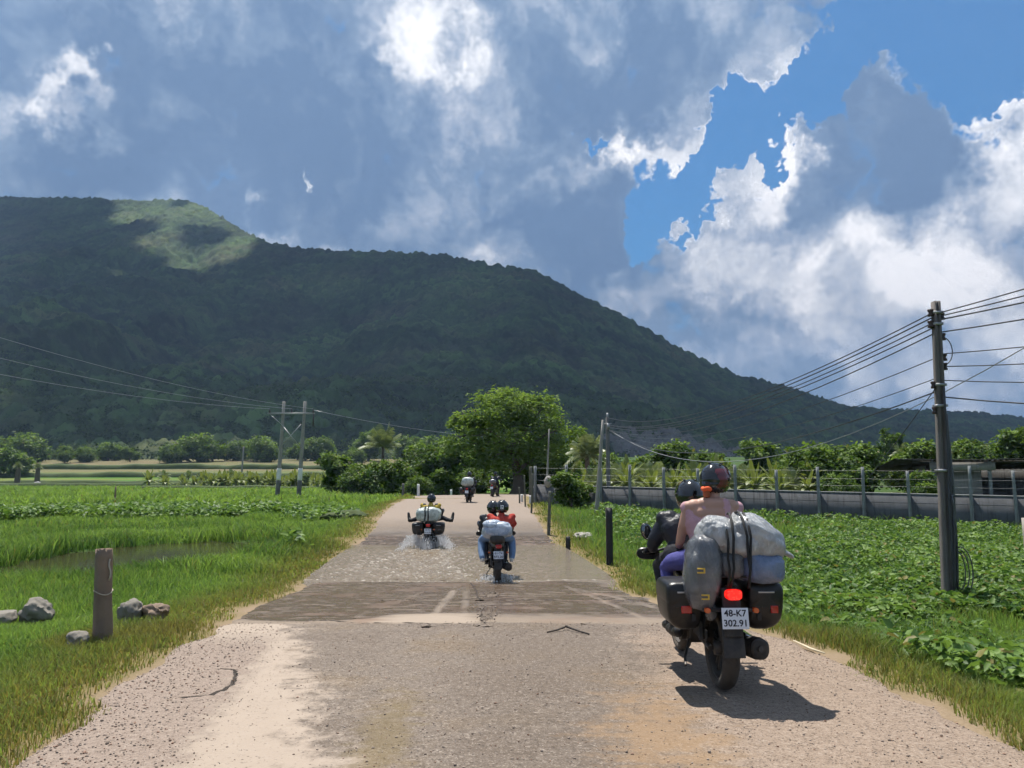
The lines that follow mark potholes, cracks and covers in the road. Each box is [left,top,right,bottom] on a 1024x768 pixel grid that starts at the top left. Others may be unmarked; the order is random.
crack [171,667,248,702]
